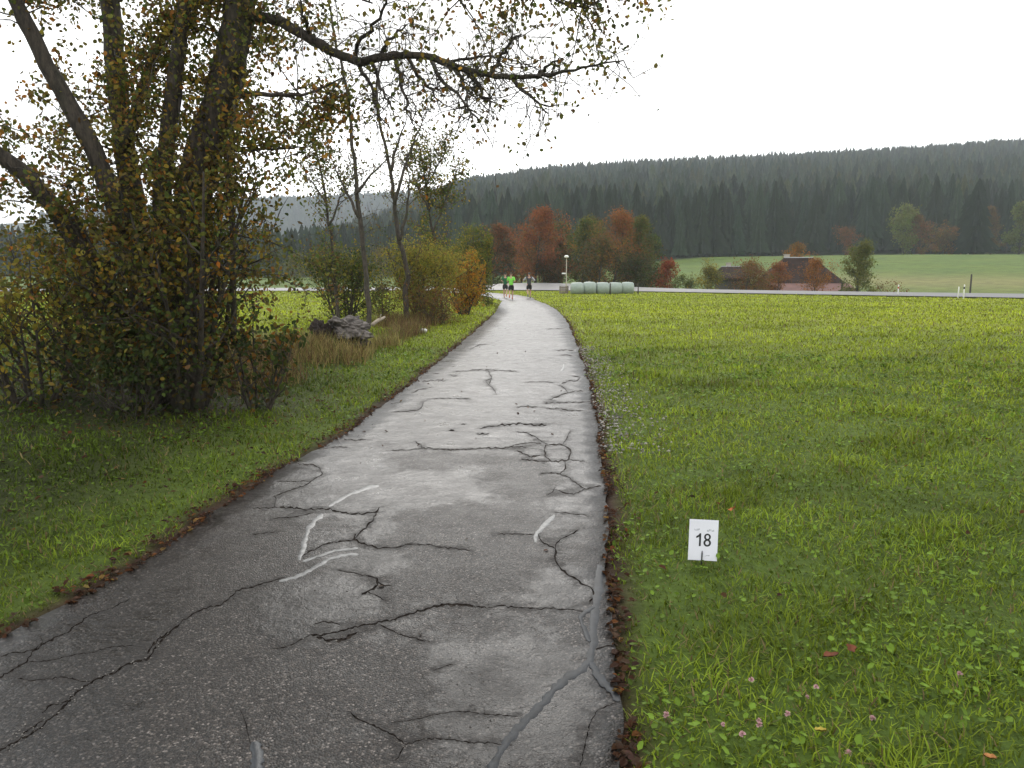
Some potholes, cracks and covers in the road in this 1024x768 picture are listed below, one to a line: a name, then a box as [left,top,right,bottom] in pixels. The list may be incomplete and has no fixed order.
crack [0,578,281,751]
crack [392,369,600,495]
crack [351,711,518,760]
crack [253,439,470,555]
crack [580,703,615,766]
crack [277,512,594,649]
